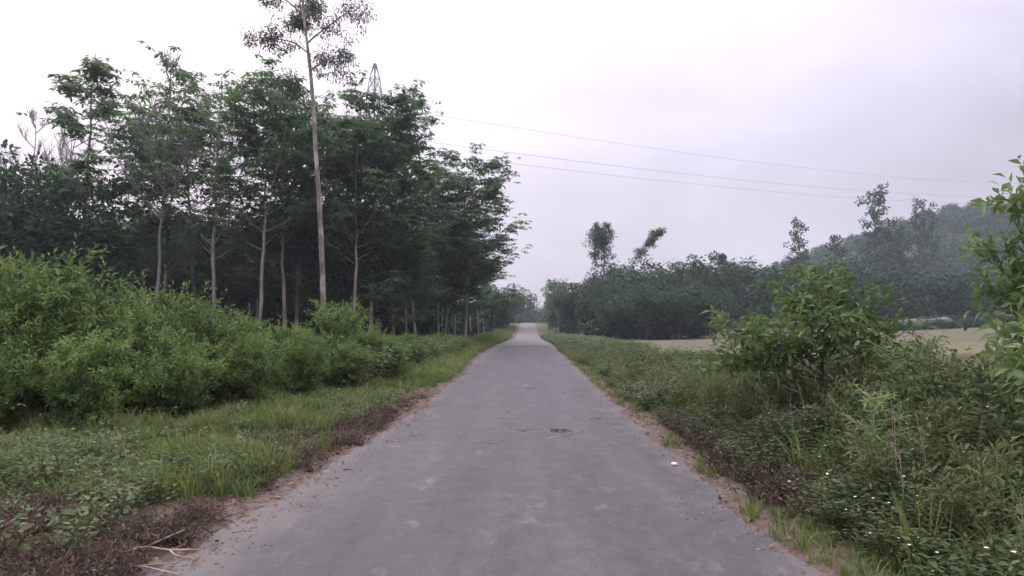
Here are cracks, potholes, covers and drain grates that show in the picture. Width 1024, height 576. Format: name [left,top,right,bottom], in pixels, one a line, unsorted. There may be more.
pothole [544,427,583,436]
